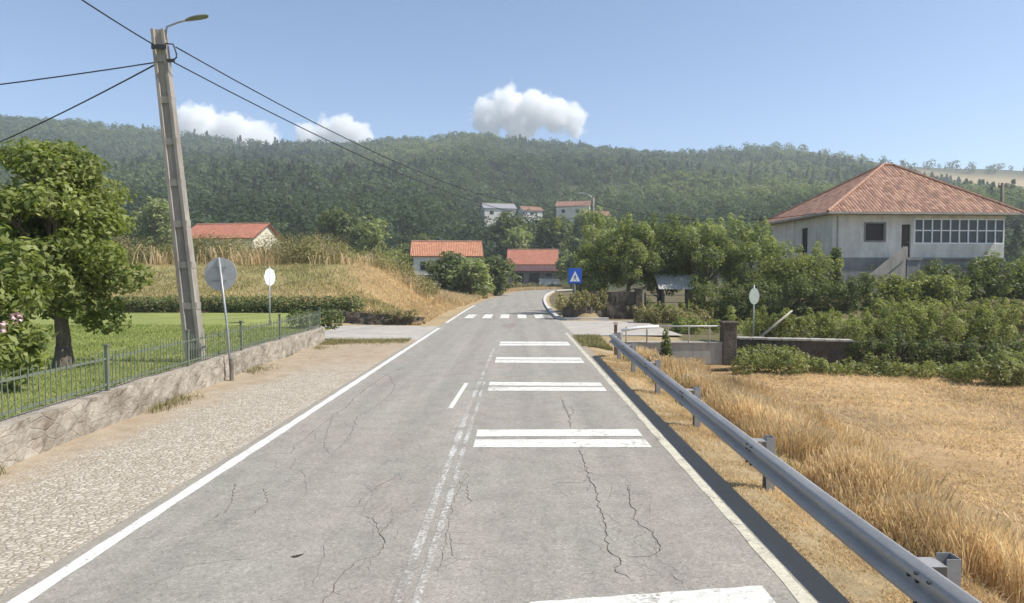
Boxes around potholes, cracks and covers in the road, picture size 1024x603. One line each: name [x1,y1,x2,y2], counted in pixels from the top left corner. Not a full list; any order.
crack [147,368,401,552]
crack [437,473,472,572]
crack [553,450,683,583]
crack [311,456,435,603]
